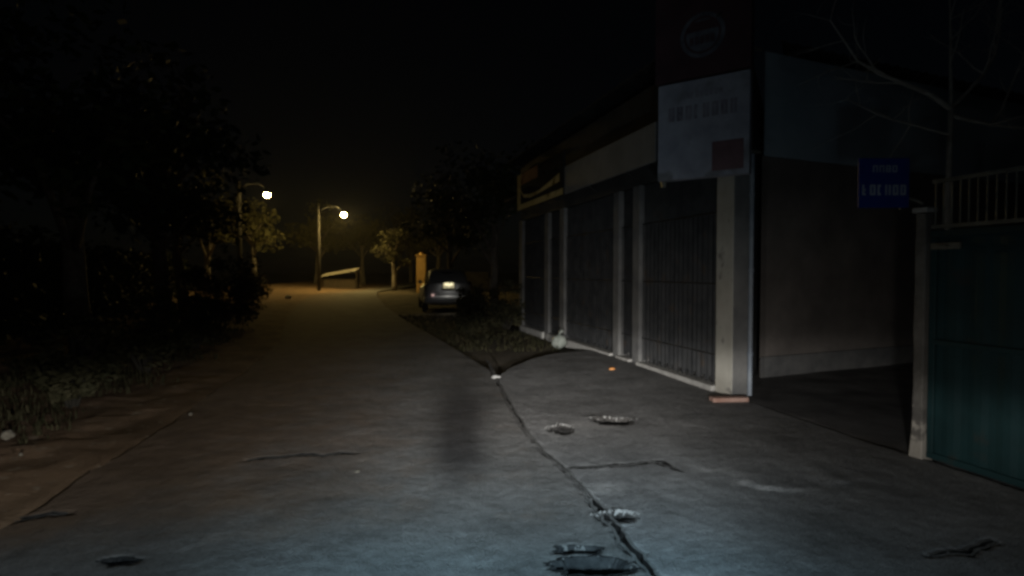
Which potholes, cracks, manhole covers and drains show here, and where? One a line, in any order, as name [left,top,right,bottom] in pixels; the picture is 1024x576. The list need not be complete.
crack [246,452,354,461]
pothole [95,556,142,567]
pothole [588,416,637,426]
crack [927,539,999,557]
crack [485,359,679,576]
pothole [589,508,640,524]
pothole [545,423,575,435]
pothole [552,544,605,555]
pothole [543,555,641,576]
